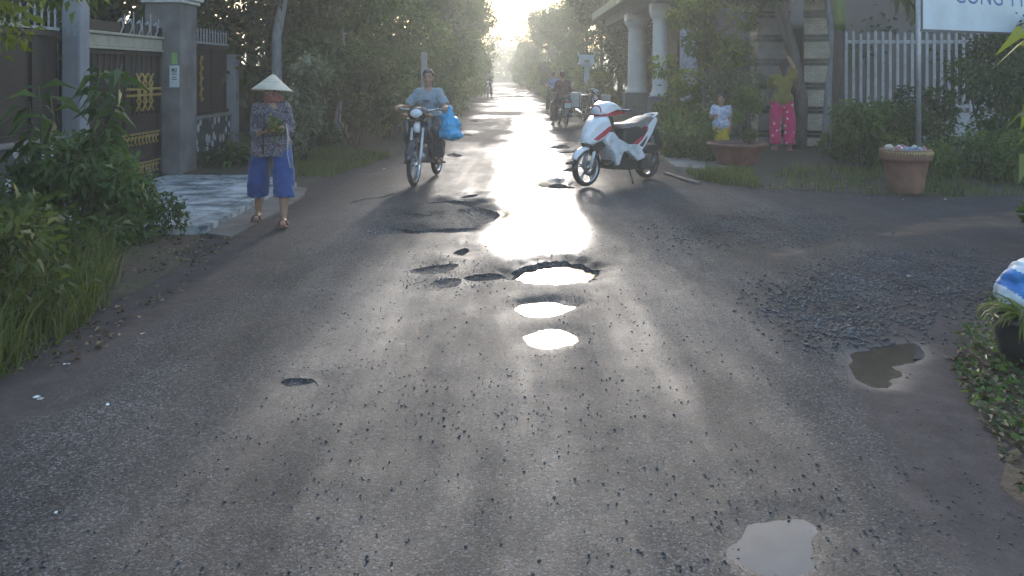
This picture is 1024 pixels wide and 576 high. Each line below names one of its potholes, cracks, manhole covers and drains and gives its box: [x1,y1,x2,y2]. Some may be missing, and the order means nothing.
pothole [456,207,500,228]
pothole [511,260,600,285]
pothole [280,378,316,387]
pothole [433,278,462,289]
pothole [412,263,458,275]
pothole [515,302,576,318]
pothole [849,343,925,388]
pothole [523,329,578,349]
pothole [726,519,818,576]
pothole [463,273,507,281]
